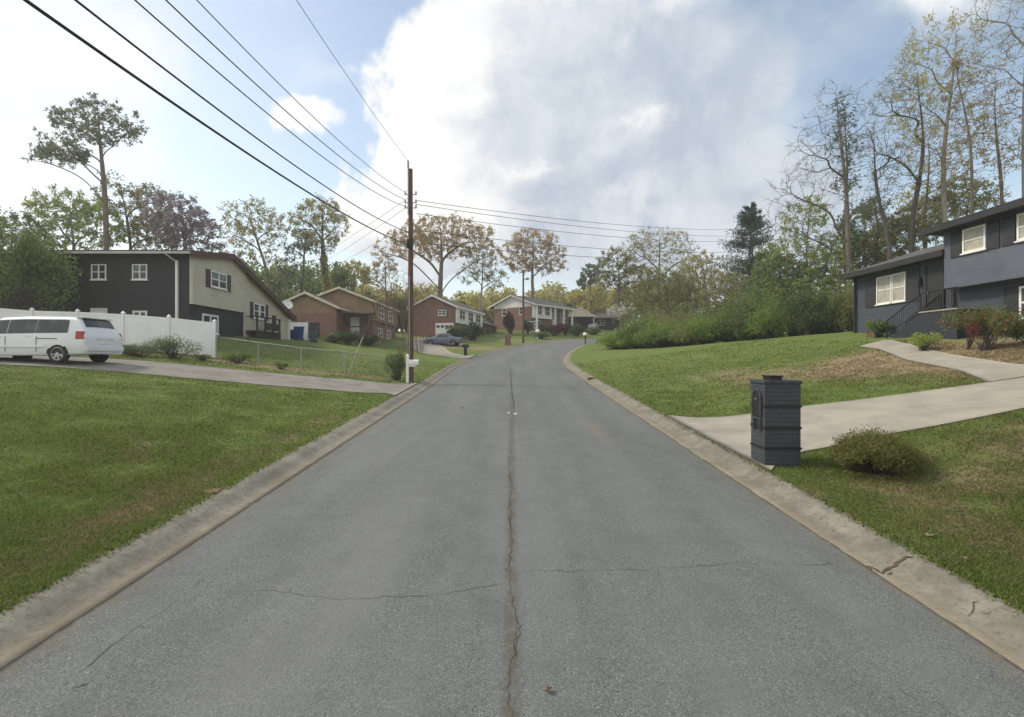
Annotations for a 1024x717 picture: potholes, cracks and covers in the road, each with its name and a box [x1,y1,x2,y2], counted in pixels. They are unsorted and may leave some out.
crack [62,575,209,688]
crack [535,562,830,572]
crack [254,583,507,602]
